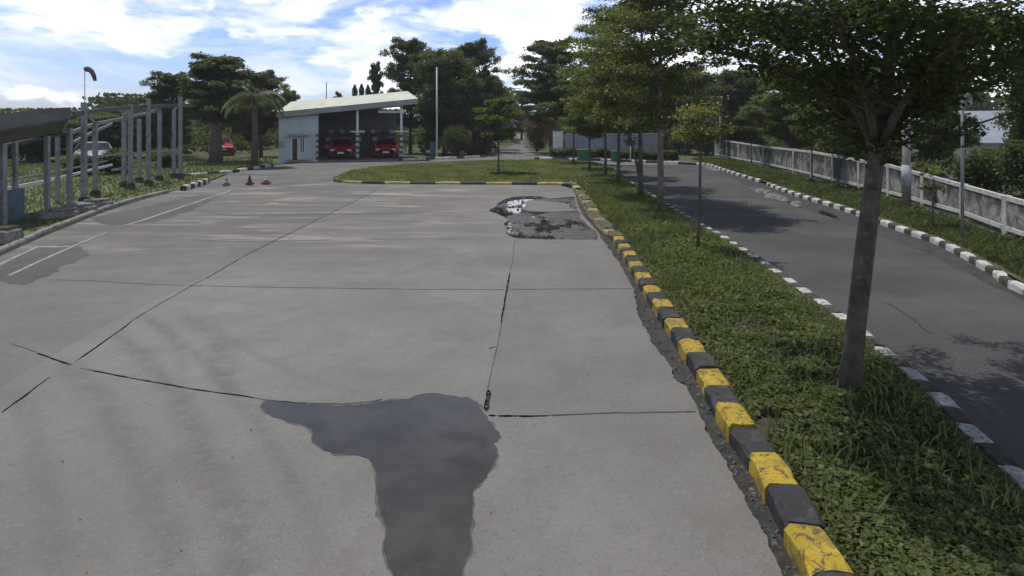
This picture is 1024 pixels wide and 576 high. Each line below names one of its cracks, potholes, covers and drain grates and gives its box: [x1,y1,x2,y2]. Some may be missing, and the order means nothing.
pothole [489,196,599,240]
crack [501,272,510,324]
crack [1,320,260,413]
